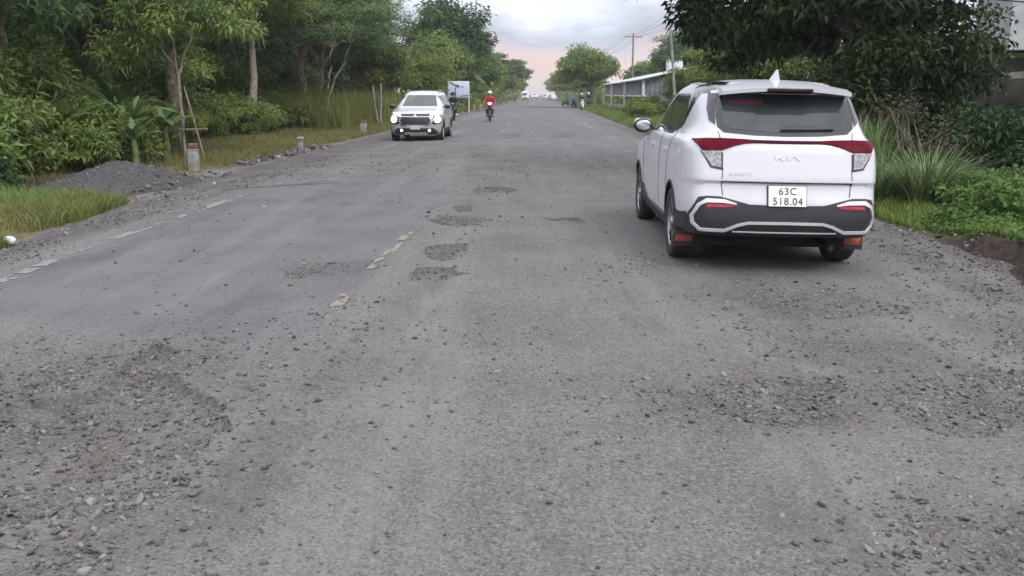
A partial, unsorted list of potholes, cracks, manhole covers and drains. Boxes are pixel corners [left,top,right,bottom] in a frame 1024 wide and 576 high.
pothole [282,261,339,279]
pothole [0,343,232,524]
pothole [689,374,849,429]
pothole [424,243,469,261]
pothole [411,266,471,283]
pothole [431,215,492,228]
pothole [879,369,1024,439]
pothole [452,205,476,213]
